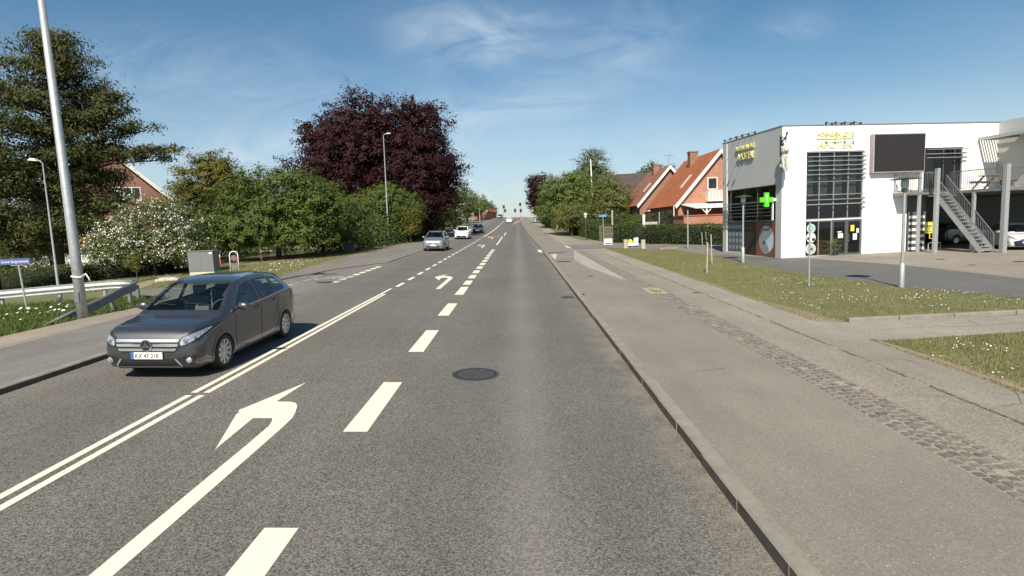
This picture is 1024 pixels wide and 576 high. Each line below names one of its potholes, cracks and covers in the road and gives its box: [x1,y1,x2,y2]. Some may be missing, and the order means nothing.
manhole cover [452,368,499,381]
